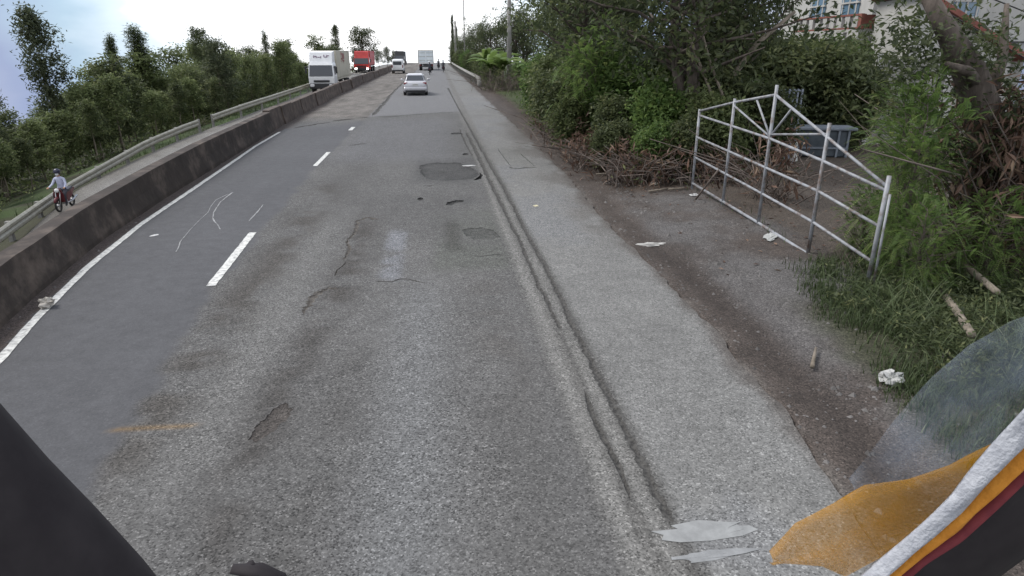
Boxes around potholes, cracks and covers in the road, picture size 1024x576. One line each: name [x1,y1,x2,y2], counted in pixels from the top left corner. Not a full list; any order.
crack [295,71,673,522]
pothole [248,403,293,443]
